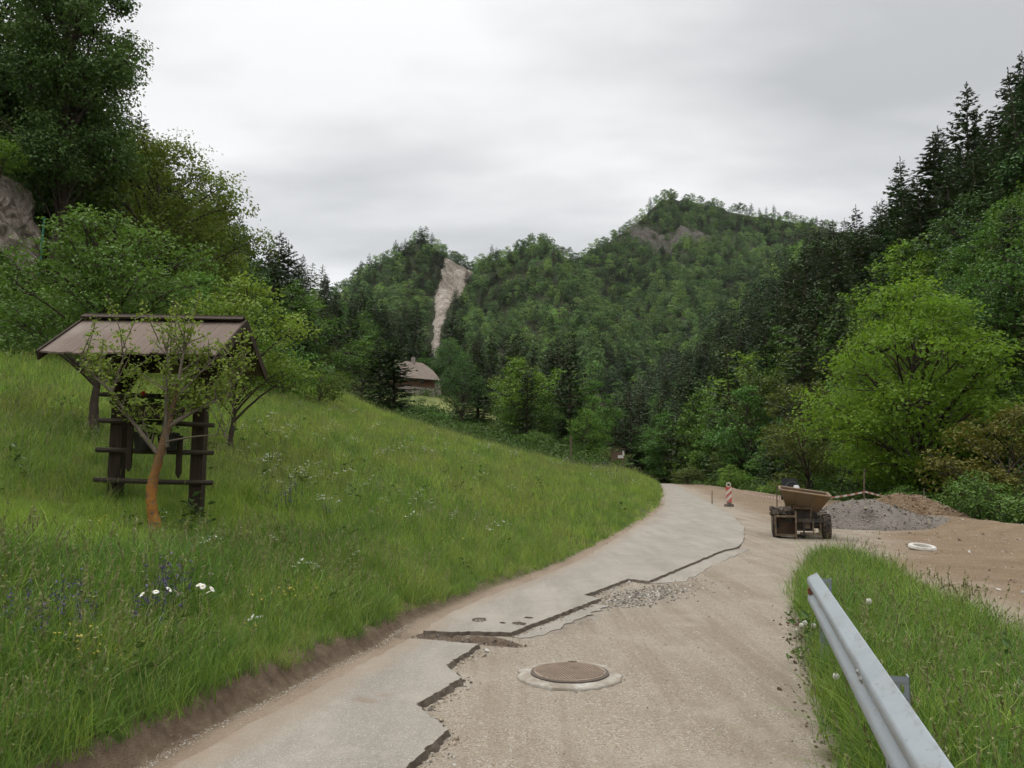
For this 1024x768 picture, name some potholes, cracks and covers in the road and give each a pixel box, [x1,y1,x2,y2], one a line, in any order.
manhole cover [517,661,623,692]
